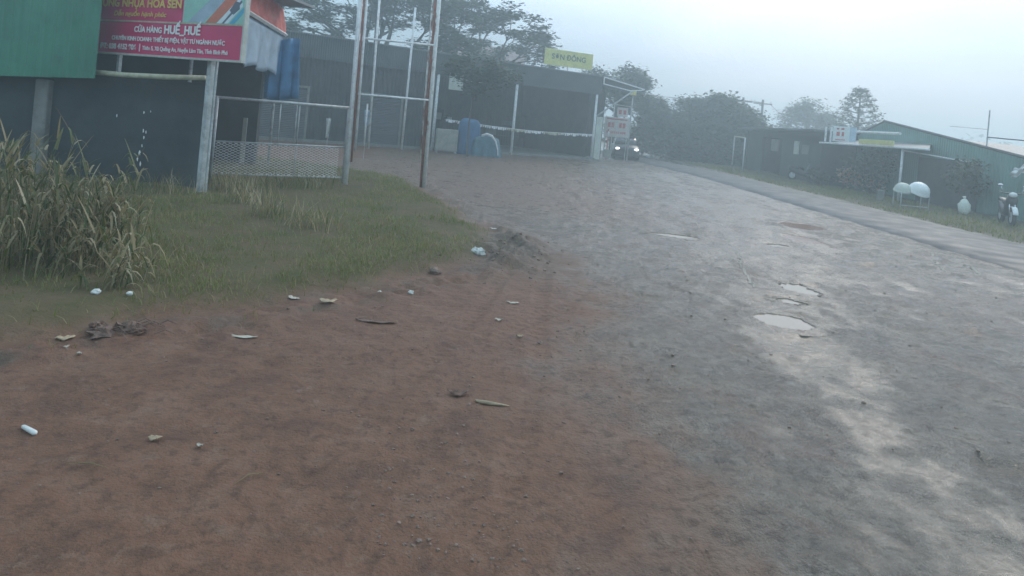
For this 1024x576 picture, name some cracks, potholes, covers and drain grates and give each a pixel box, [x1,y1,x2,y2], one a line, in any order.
crack [735,251,757,288]
pothole [737,309,834,337]
pothole [764,297,816,306]
pothole [641,231,713,241]
pothole [768,219,839,234]
pothole [766,282,825,298]
